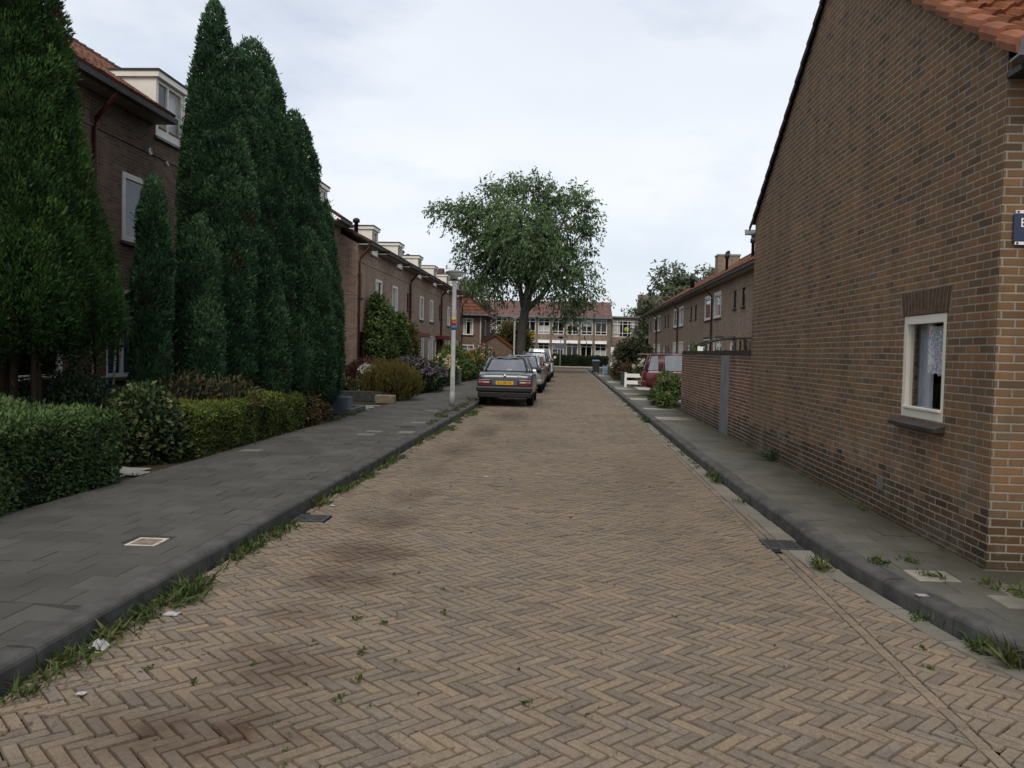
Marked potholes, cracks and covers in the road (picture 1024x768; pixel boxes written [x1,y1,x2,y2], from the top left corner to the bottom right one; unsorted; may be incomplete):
drain grate [293,514,331,524]
drain grate [759,539,804,553]
utility cover [125,537,169,546]
